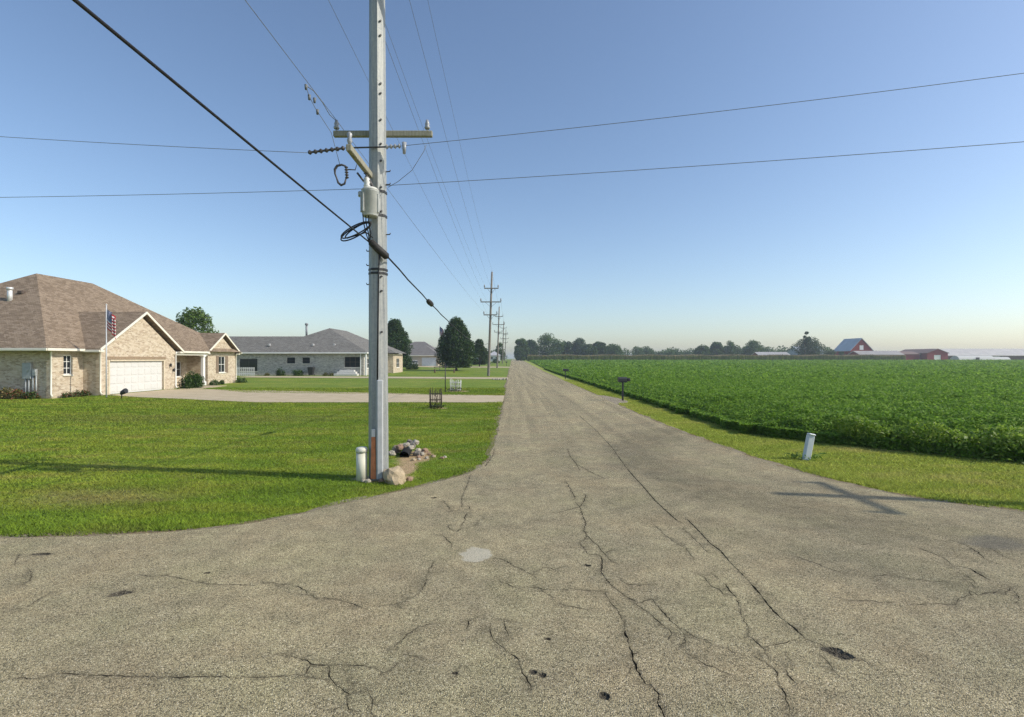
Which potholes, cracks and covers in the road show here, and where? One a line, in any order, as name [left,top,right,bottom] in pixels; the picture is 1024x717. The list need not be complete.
crack [17,627,418,712]
crack [145,563,433,607]
pothole [821,647,856,660]
crack [504,451,734,717]
crack [874,543,1019,605]
crack [490,619,531,691]
crack [580,416,869,713]
